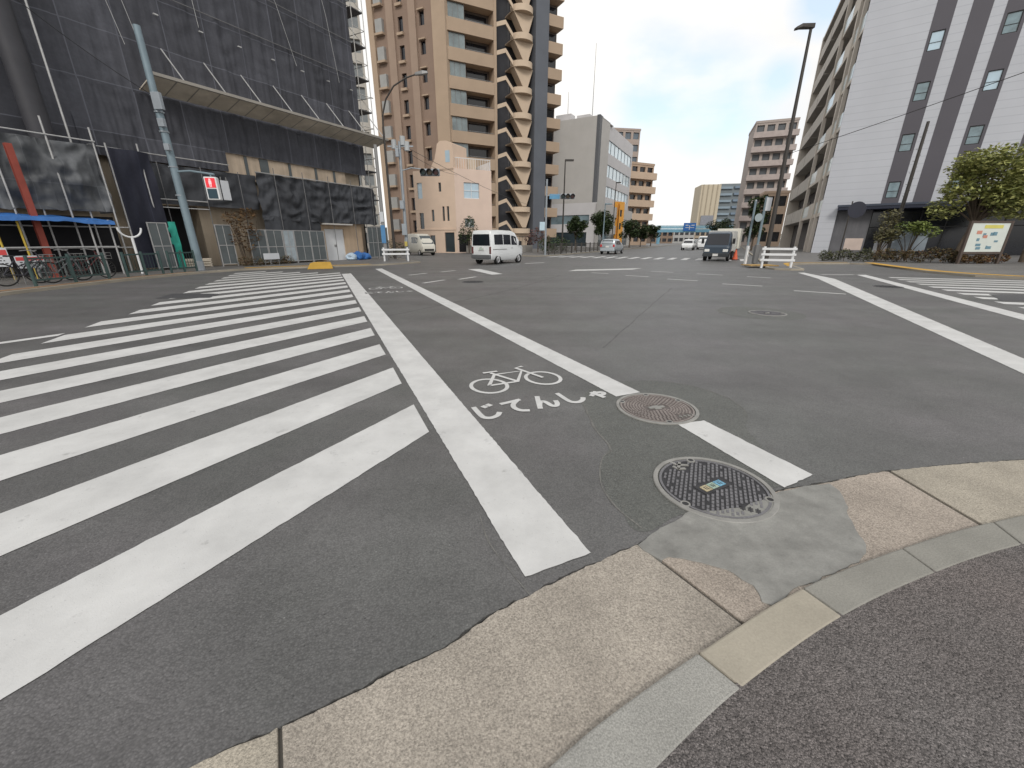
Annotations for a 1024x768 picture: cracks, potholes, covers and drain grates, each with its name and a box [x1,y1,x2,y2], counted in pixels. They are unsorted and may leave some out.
manhole cover [616,393,700,425]
manhole cover [653,457,780,523]
